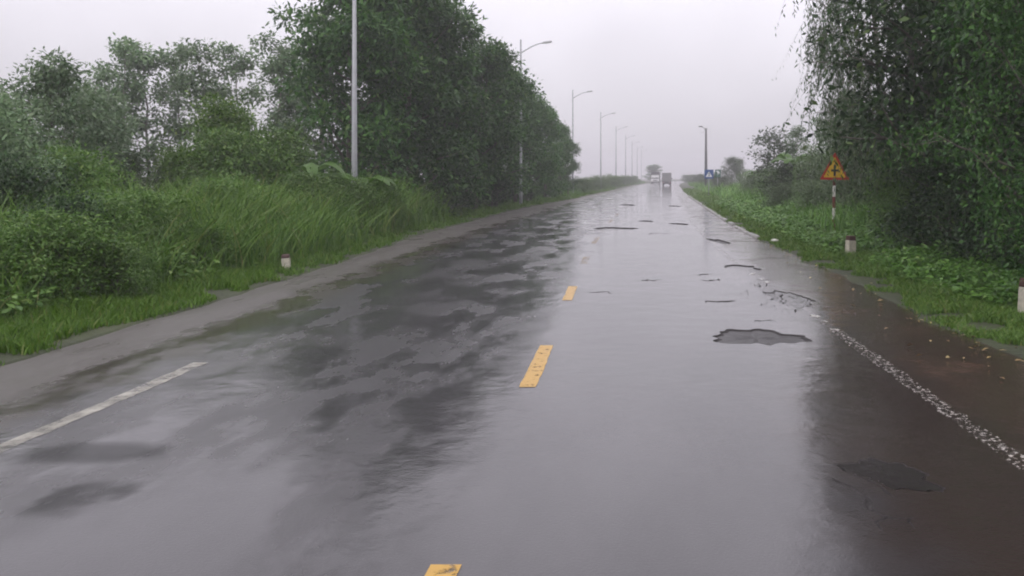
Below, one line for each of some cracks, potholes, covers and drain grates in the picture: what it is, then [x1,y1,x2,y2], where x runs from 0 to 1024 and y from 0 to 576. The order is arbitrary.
pothole [832,457,946,492]
pothole [713,328,812,346]
